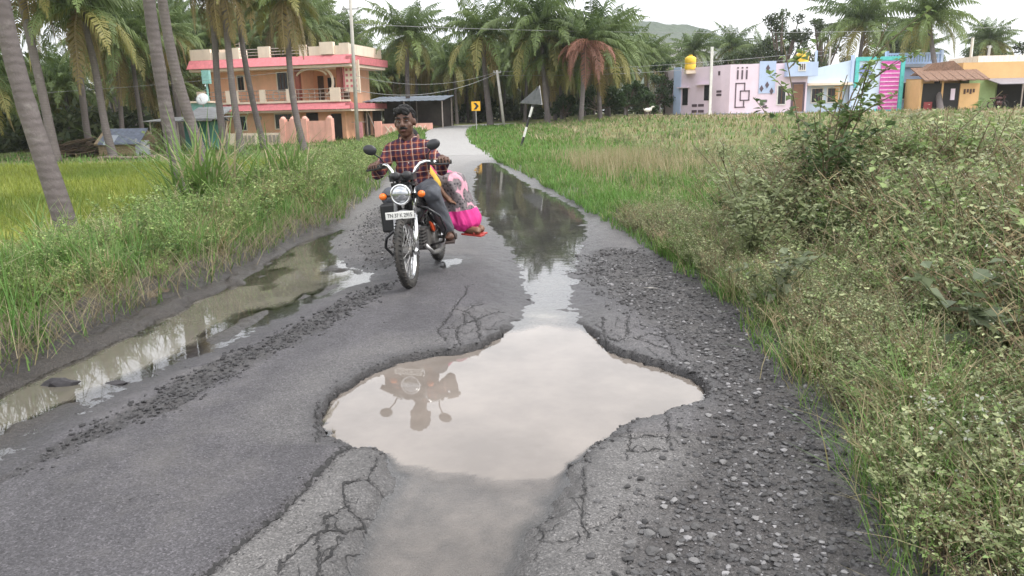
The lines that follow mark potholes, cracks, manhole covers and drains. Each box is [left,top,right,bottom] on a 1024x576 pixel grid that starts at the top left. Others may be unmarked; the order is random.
crack [208,401,388,576]
crack [620,414,678,463]
crack [435,286,504,345]
pothole [309,316,715,497]
